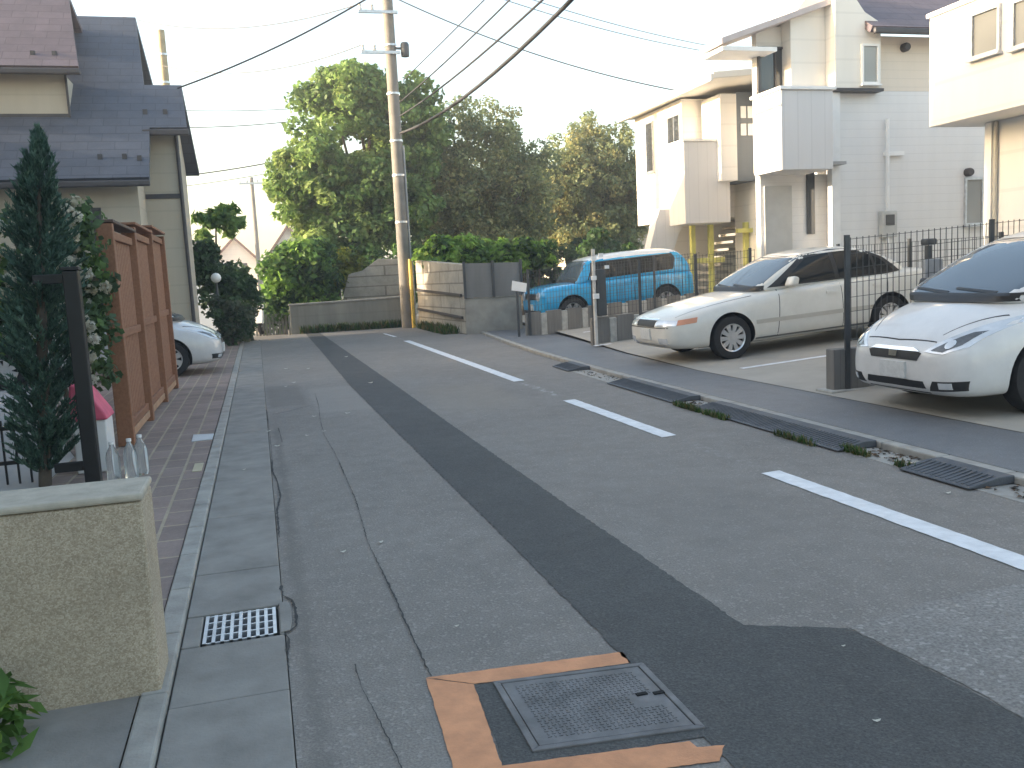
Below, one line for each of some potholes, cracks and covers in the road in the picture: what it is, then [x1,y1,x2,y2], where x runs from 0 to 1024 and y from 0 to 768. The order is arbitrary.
manhole cover [493,663,705,753]
crack [276,401,432,768]
drain grate [201,601,292,647]
